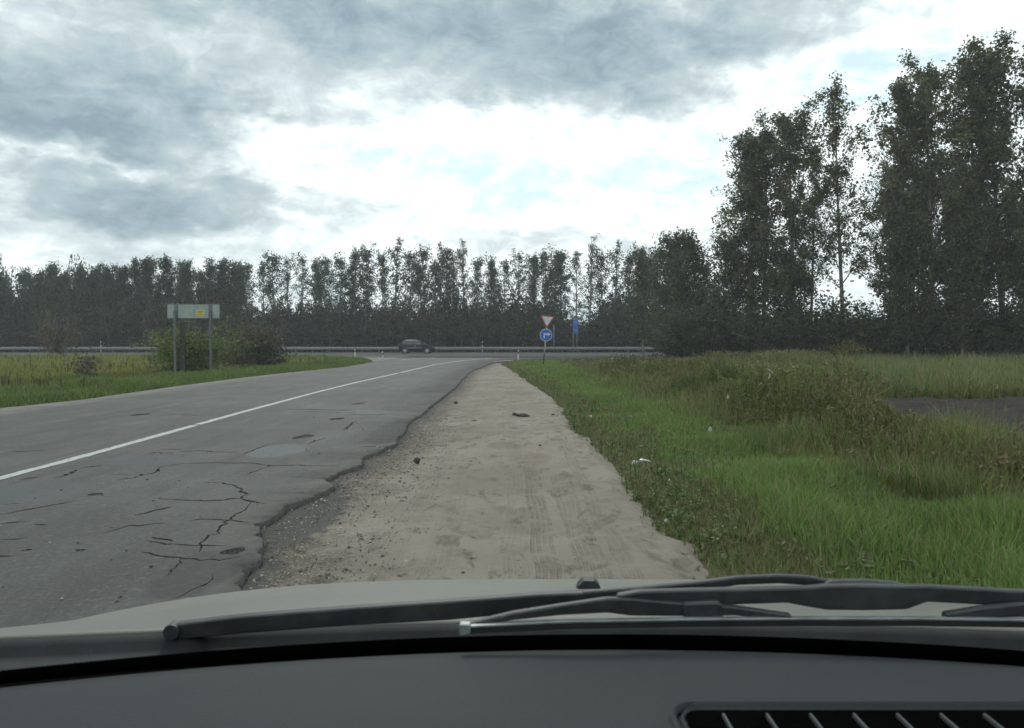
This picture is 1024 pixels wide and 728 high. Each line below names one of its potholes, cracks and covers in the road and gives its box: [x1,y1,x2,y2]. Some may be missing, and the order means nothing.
crack [1,500,77,540]
pothole [220,547,245,555]
crack [57,444,338,598]
